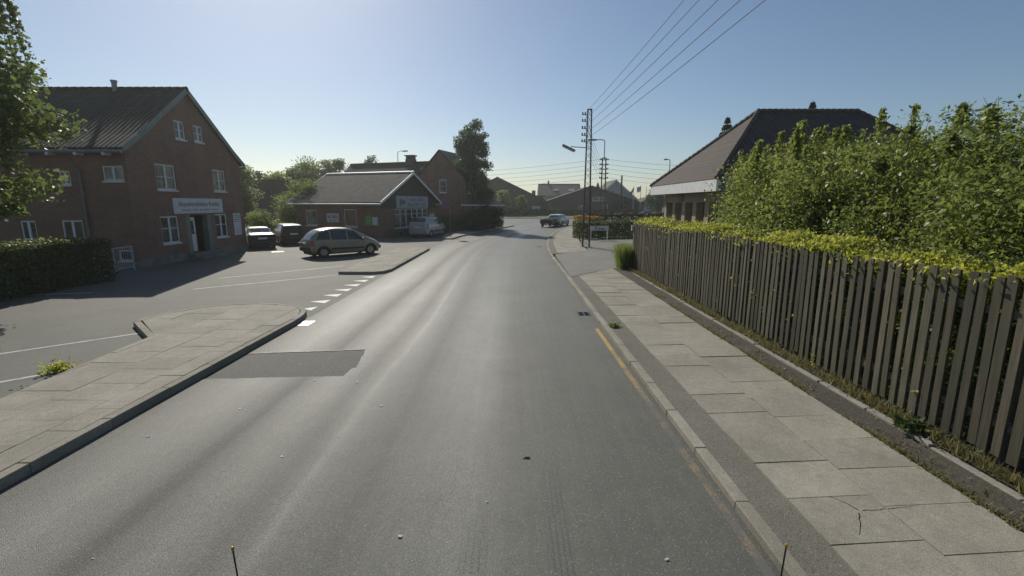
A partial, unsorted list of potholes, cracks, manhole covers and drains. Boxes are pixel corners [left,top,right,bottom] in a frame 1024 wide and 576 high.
crack [831,497,912,534]
